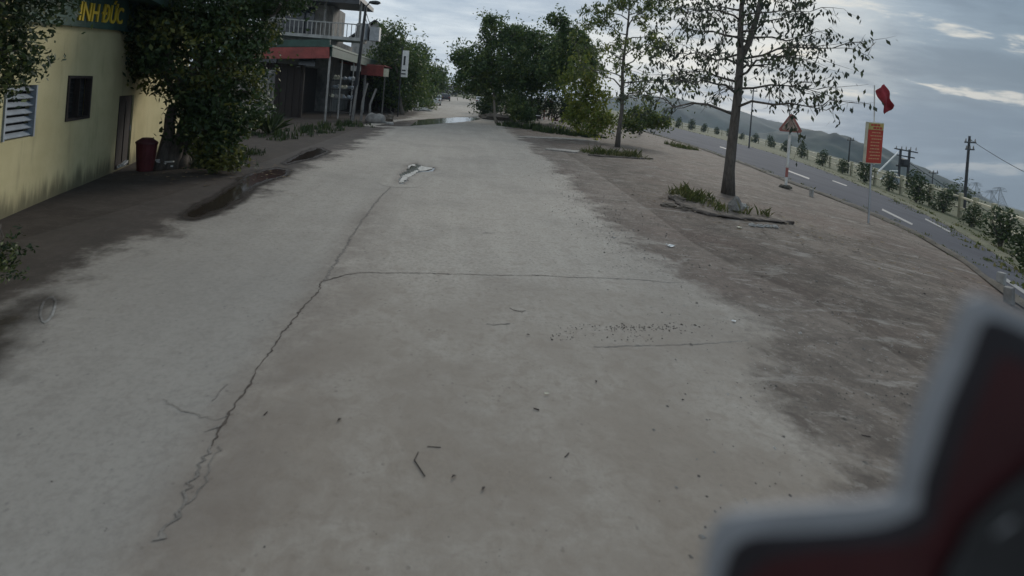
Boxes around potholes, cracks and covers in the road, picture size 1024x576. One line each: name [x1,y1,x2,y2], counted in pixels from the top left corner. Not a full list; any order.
crack [152,188,686,541]
pothole [380,161,449,188]
